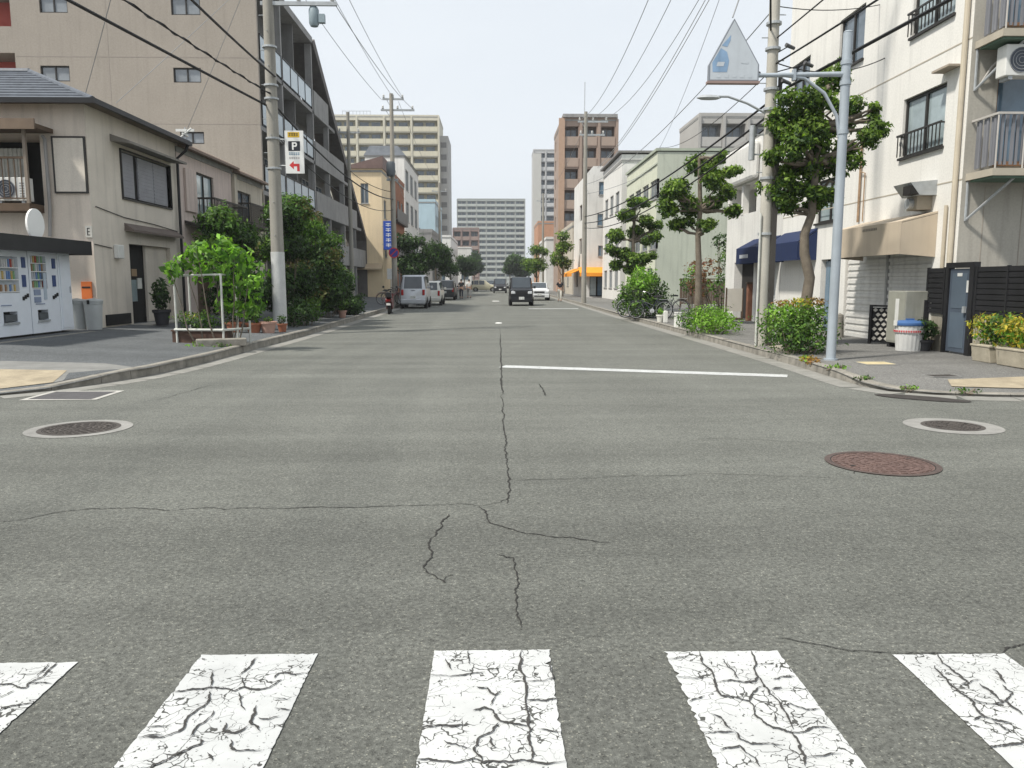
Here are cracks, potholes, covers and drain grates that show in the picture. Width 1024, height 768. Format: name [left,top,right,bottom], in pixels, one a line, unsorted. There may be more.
crack [1,499,610,582]
manhole cover [903,418,1006,434]
manhole cover [22,420,133,438]
utility cover [21,390,125,400]
manhole cover [824,451,943,476]
crack [499,554,522,627]
